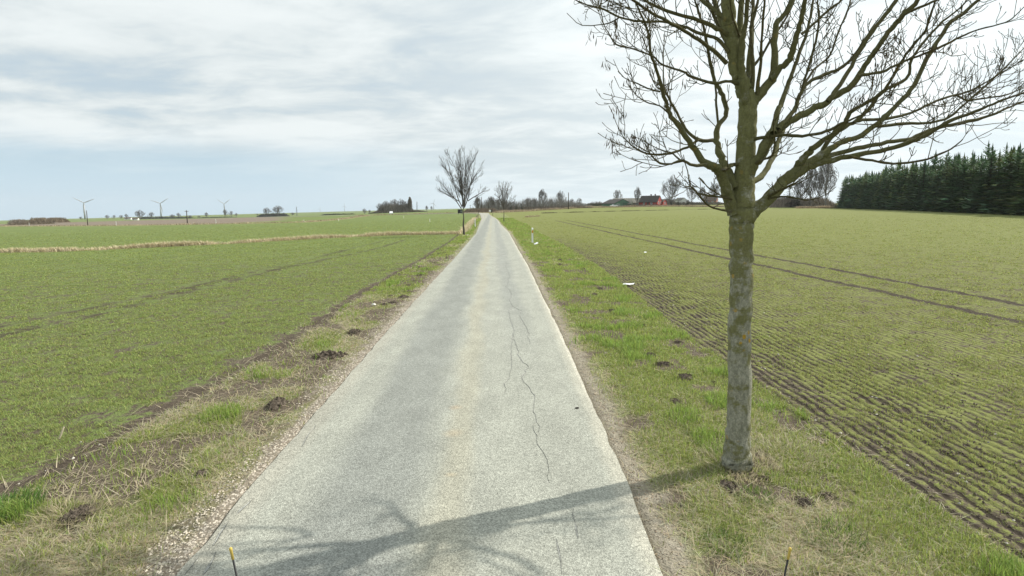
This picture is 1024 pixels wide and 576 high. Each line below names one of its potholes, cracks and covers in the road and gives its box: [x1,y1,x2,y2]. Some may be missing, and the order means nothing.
crack [556,509,578,574]
crack [504,265,549,480]
